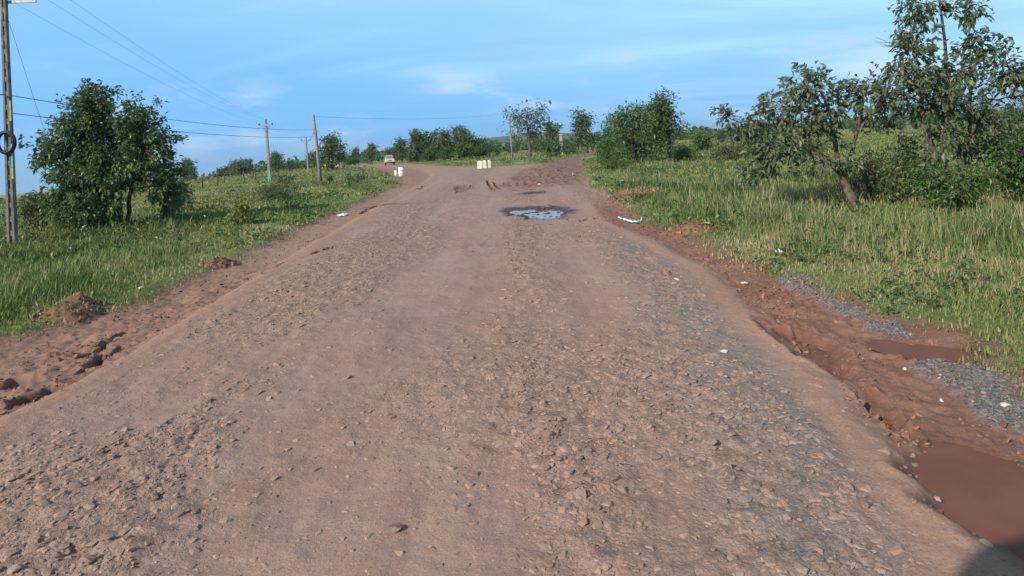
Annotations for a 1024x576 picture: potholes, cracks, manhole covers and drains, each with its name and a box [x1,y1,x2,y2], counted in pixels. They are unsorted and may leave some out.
pothole [0,371,48,391]
pothole [452,183,479,193]
pothole [880,419,1024,561]
pothole [859,337,1006,364]
pothole [500,205,578,220]
